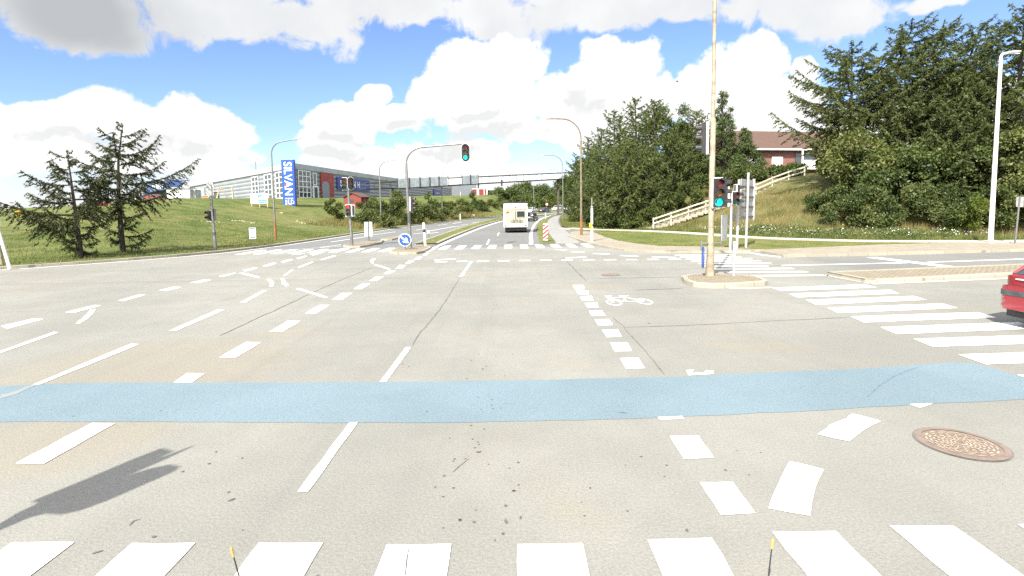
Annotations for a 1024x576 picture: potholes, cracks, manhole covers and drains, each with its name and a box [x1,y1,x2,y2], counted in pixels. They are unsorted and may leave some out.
manhole cover [912,427,1014,462]
